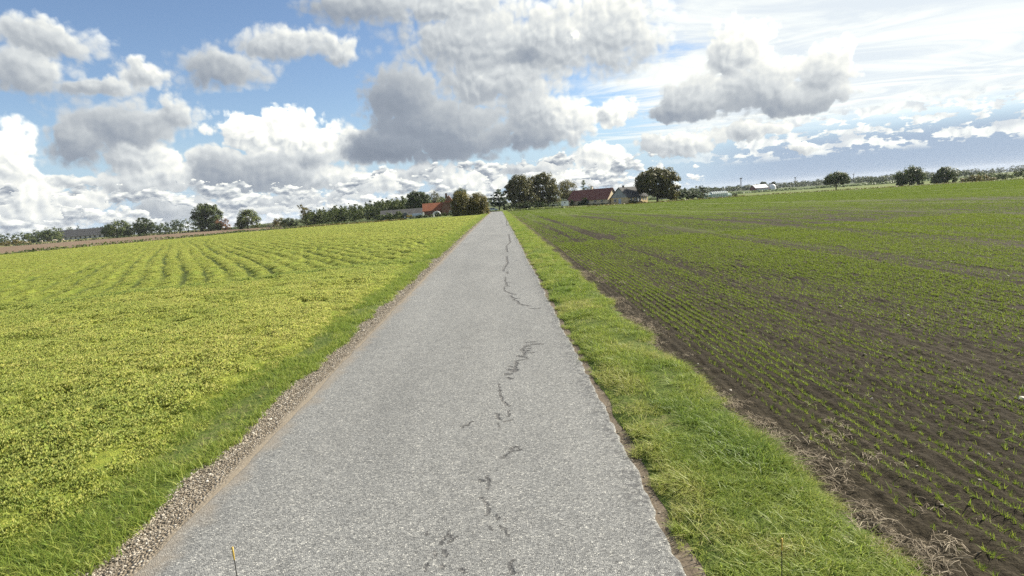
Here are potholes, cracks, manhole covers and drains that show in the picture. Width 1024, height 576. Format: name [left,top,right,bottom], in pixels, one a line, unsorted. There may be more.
crack [495,341,543,428]
crack [478,446,522,537]
crack [423,530,468,573]
crack [508,559,520,574]
crack [502,219,539,309]
